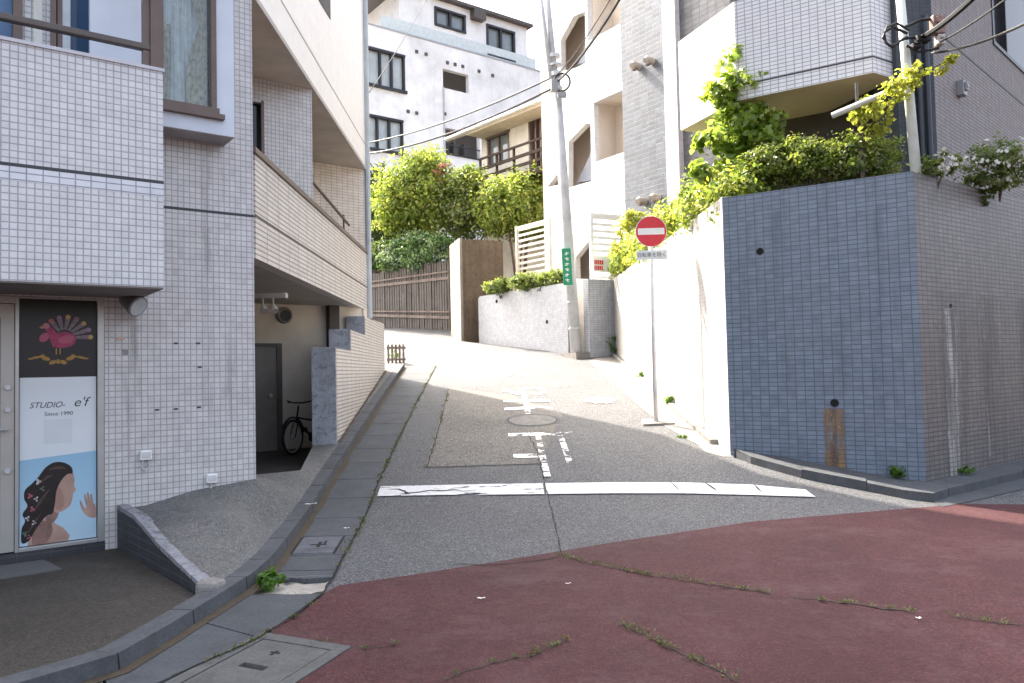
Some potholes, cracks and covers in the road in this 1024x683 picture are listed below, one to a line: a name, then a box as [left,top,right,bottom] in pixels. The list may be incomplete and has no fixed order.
crack [451,432,776,595]
manhole cover [164,632,351,683]
manhole cover [290,536,345,555]
crack [623,624,739,682]
crack [795,597,904,611]
crack [439,640,566,682]
manhole cover [505,414,560,426]
